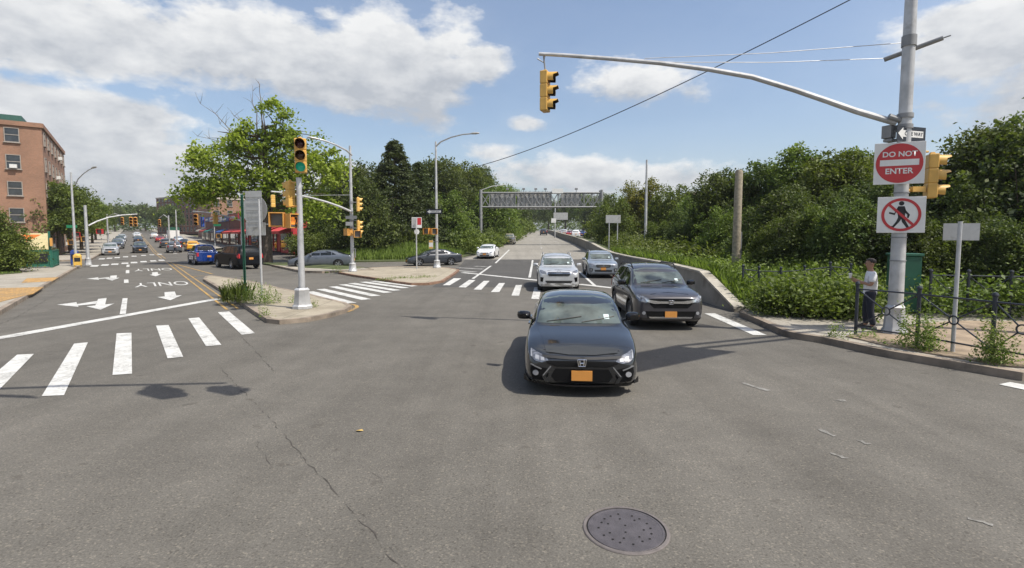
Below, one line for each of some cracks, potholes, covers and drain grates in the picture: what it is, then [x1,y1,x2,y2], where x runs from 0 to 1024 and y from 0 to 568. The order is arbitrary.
crack [222,370,398,564]
manhole cover [583,506,671,556]
